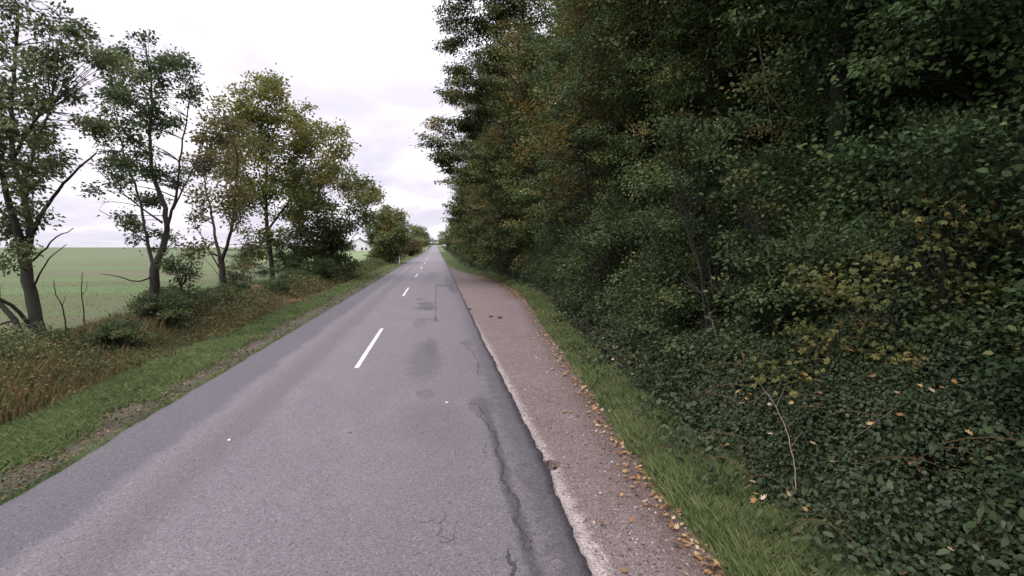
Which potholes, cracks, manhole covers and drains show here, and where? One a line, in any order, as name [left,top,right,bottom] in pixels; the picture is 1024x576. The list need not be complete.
crack [465,403,532,576]
pothole [543,459,561,471]
